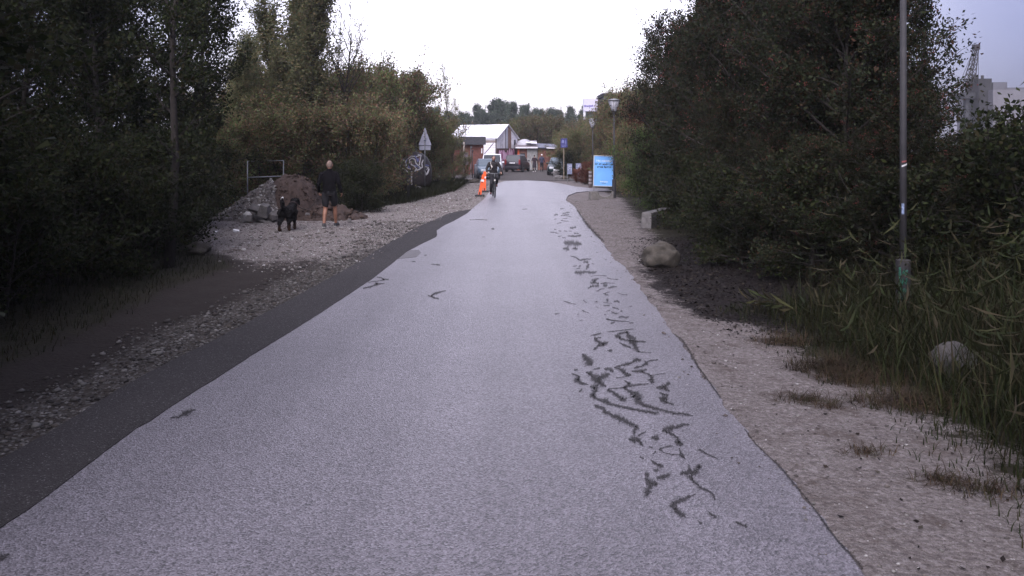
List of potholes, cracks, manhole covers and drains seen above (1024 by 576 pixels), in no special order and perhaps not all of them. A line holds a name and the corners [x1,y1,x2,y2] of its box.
crack [363,277,389,289]
crack [574,319,721,524]
